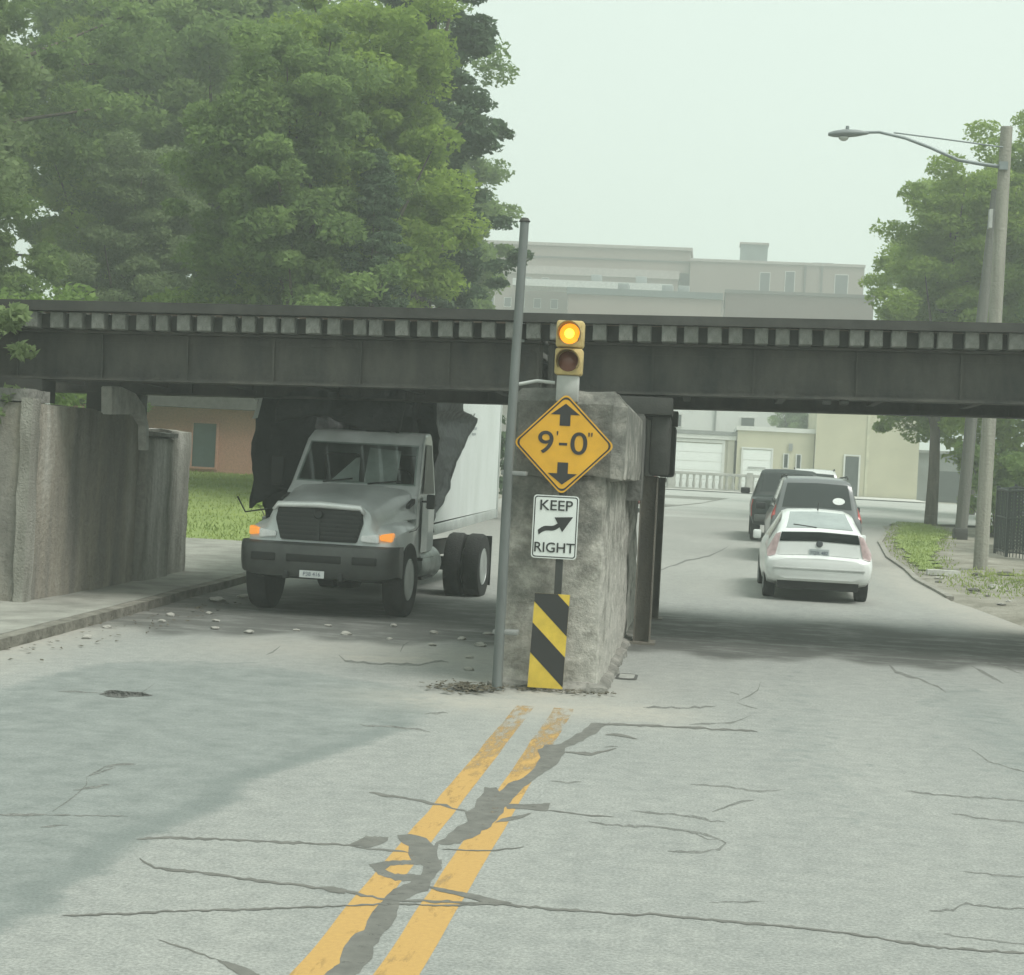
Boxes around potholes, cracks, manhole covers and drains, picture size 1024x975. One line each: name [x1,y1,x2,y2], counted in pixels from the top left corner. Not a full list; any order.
crack [910,790,1024,823]
crack [929,902,1024,912]
crack [974,661,1023,683]
crack [888,659,945,692]
crack [339,640,447,666]
crack [643,682,761,725]
crack [589,784,782,853]
crack [360,712,446,732]
pothole [101,690,152,698]
crack [945,933,1024,944]
crack [0,763,135,827]
crack [661,547,727,570]
